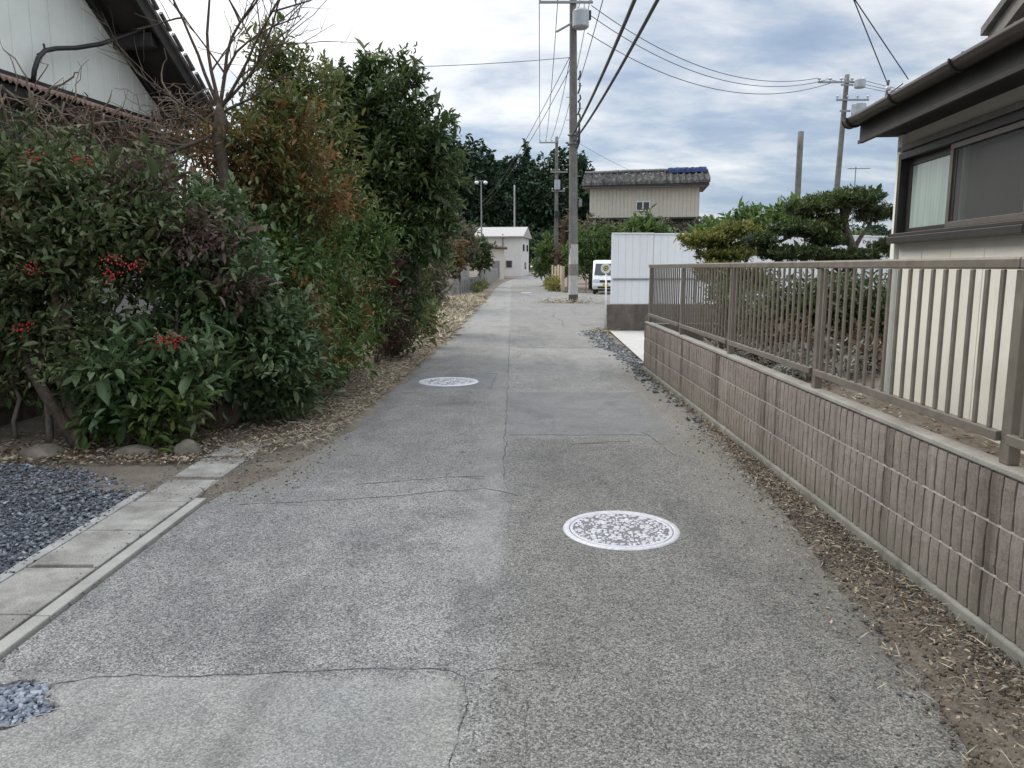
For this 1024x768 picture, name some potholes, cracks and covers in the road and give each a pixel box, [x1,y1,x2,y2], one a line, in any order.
crack [364,476,484,484]
manhole cover [419,377,478,386]
crack [56,668,529,767]
manhole cover [563,511,680,551]
